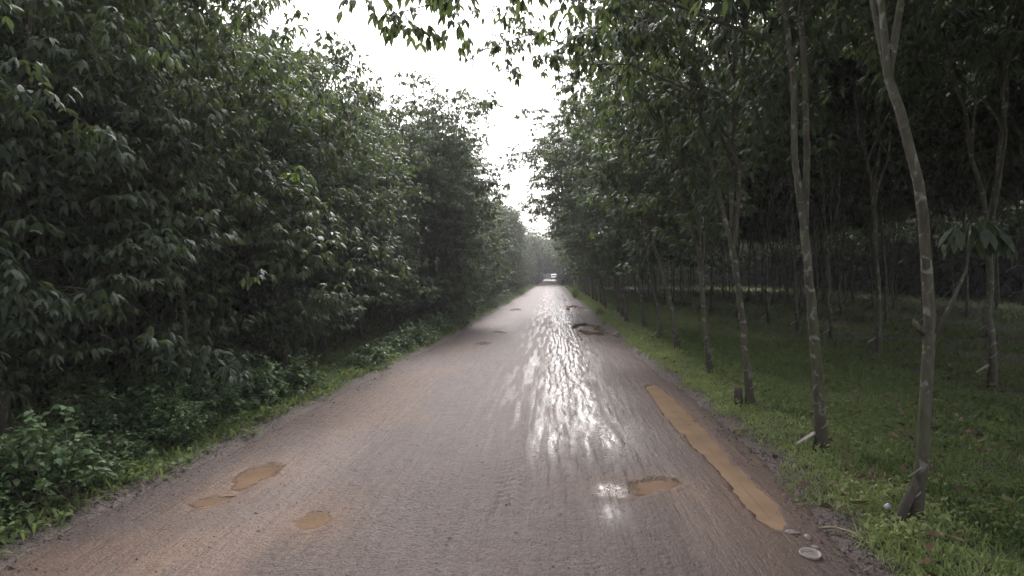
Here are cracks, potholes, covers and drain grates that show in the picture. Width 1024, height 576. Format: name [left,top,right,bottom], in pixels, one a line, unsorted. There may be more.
pothole [218,460,292,497]
pothole [176,490,242,511]
pothole [283,507,342,534]
pothole [641,384,797,534]
pothole [568,323,613,337]
